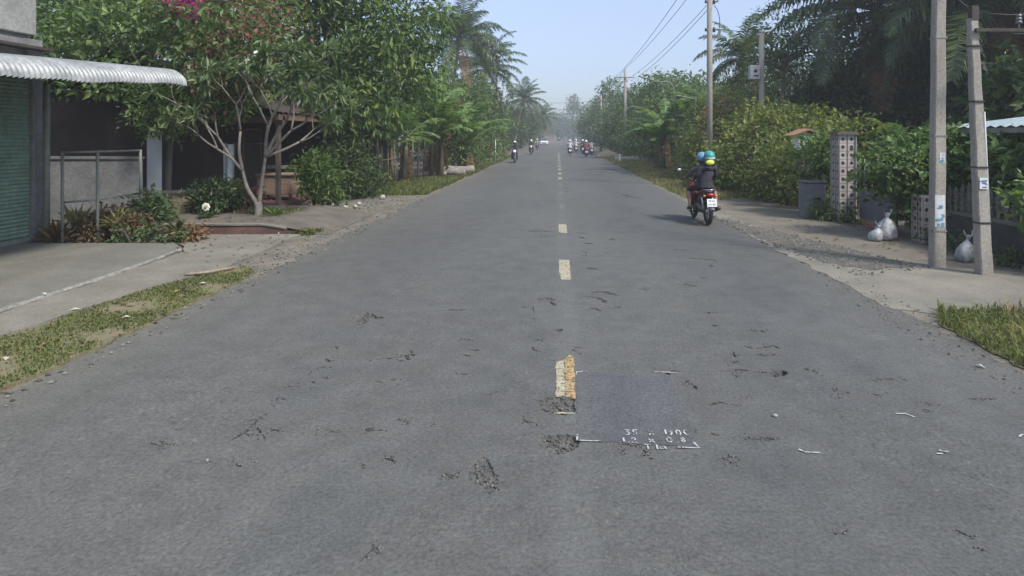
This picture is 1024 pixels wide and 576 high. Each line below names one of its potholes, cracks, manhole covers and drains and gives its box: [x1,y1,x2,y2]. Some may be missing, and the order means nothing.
pothole [537,397,576,416]
pothole [466,457,499,495]
crack [228,345,339,442]
crack [361,538,384,561]
pothole [538,434,581,455]
